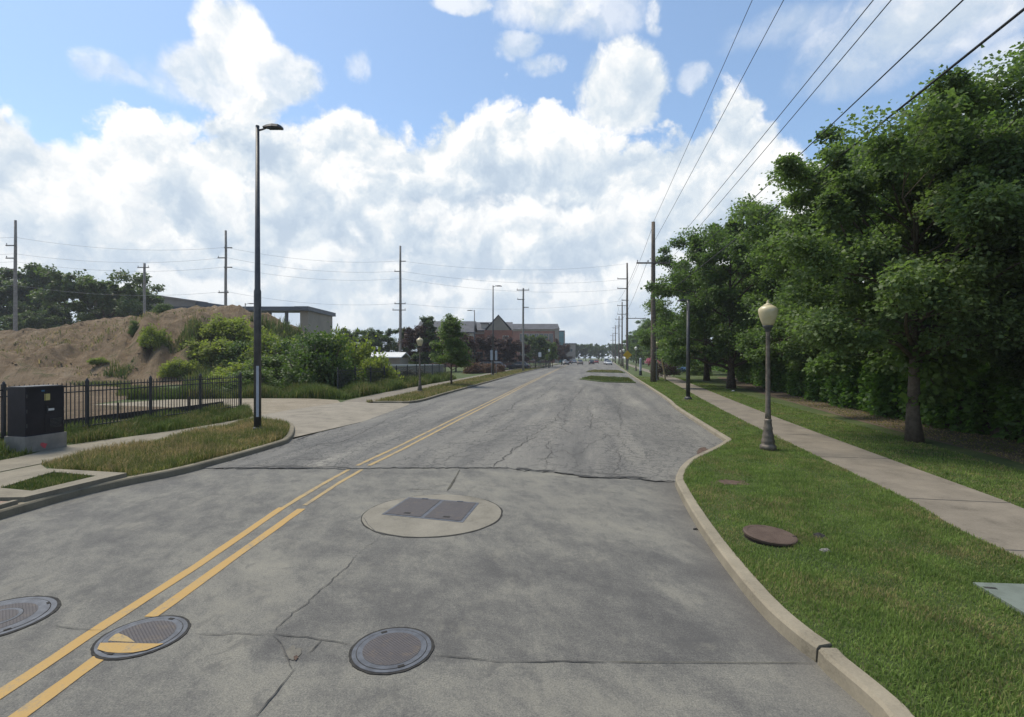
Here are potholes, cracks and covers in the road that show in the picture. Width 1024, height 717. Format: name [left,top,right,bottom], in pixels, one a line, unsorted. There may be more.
crack [441,385,641,477]
manhole cover [90,615,191,661]
crack [196,632,351,714]
manhole cover [0,595,62,637]
manhole cover [743,525,798,547]
manhole cover [349,627,435,675]
utility cover [361,494,503,538]
